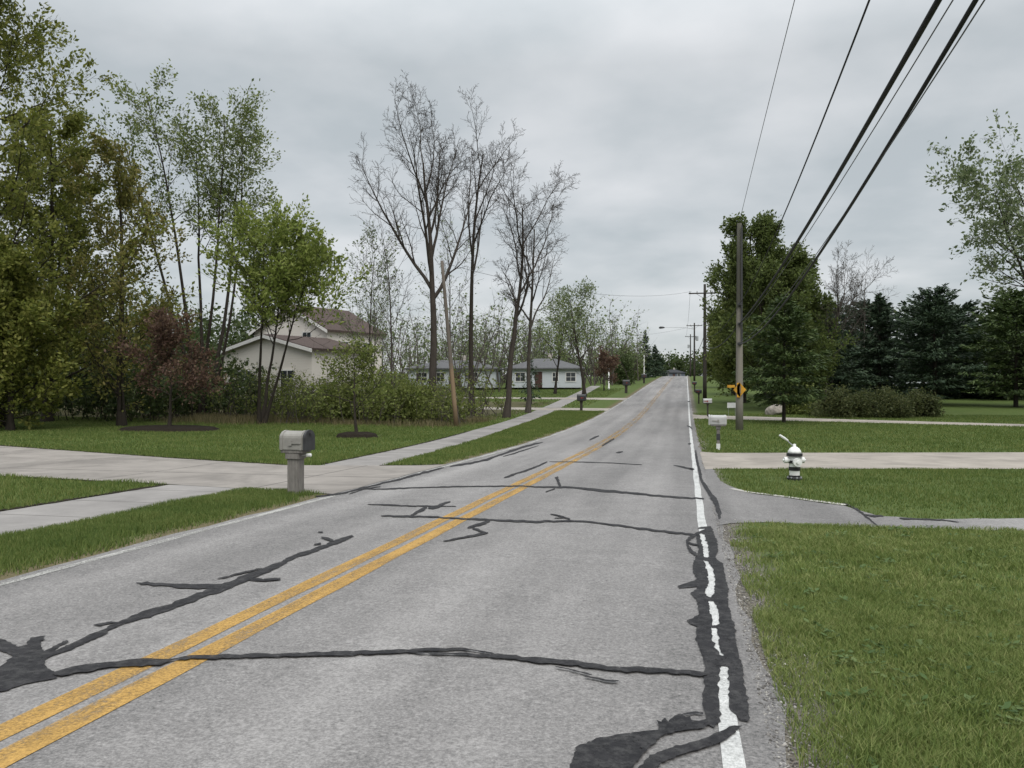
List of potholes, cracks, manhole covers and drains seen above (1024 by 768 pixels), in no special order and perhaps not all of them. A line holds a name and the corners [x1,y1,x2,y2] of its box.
crack [846,503,883,527]
